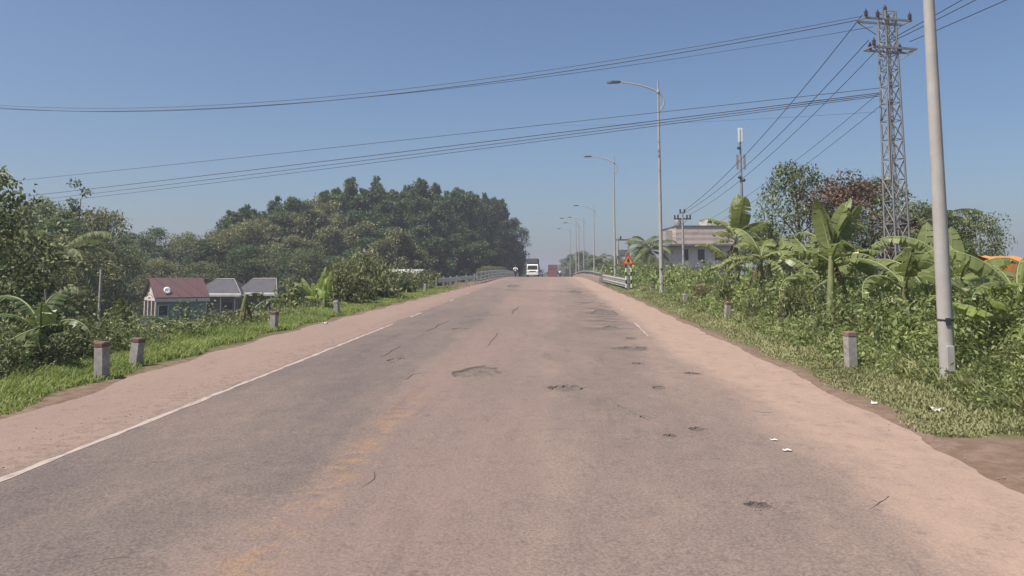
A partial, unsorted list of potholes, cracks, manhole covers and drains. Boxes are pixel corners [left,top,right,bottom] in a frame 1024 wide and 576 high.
pothole [451,365,502,378]
crack [618,406,655,420]
